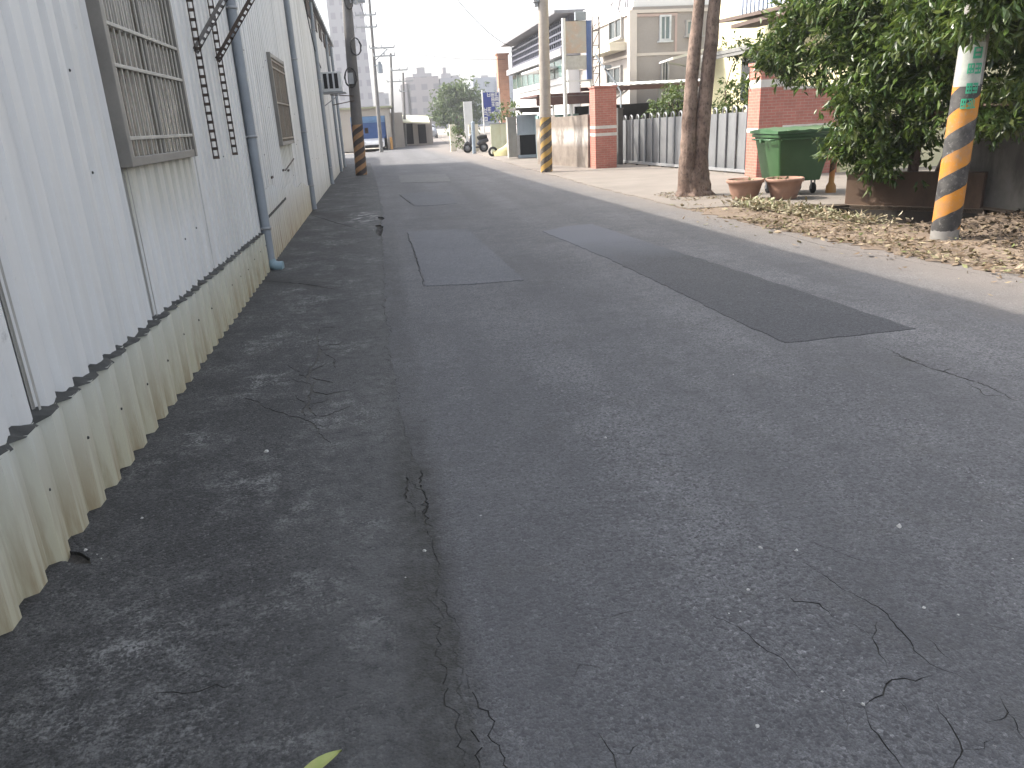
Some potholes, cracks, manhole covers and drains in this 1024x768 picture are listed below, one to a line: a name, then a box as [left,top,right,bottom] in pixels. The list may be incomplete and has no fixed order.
crack [886,348,1013,400]
crack [688,531,1024,768]
crack [249,312,351,444]
